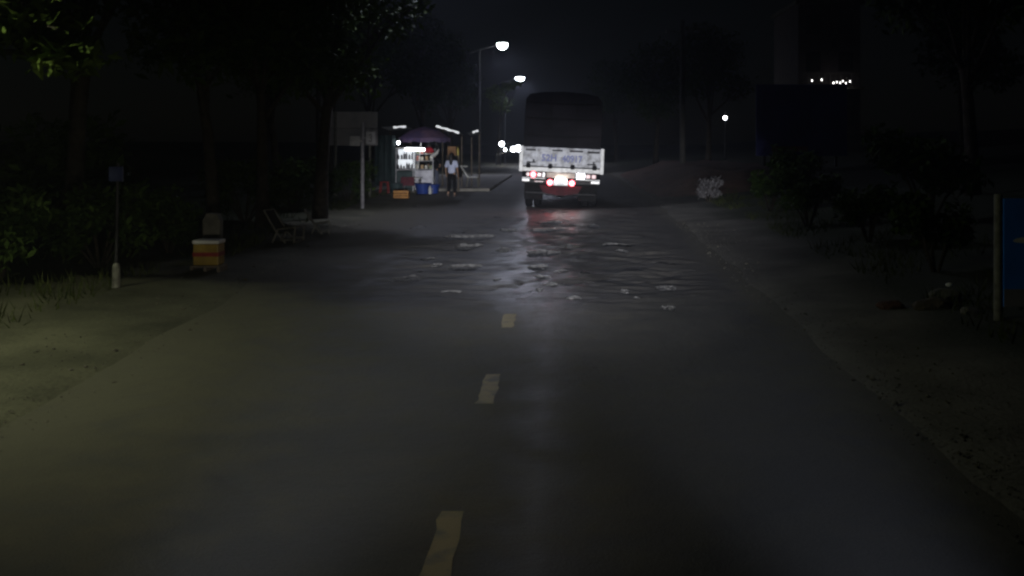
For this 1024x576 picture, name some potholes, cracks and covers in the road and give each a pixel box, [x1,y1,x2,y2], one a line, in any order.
pothole [455,243,484,251]
pothole [527,249,561,257]
